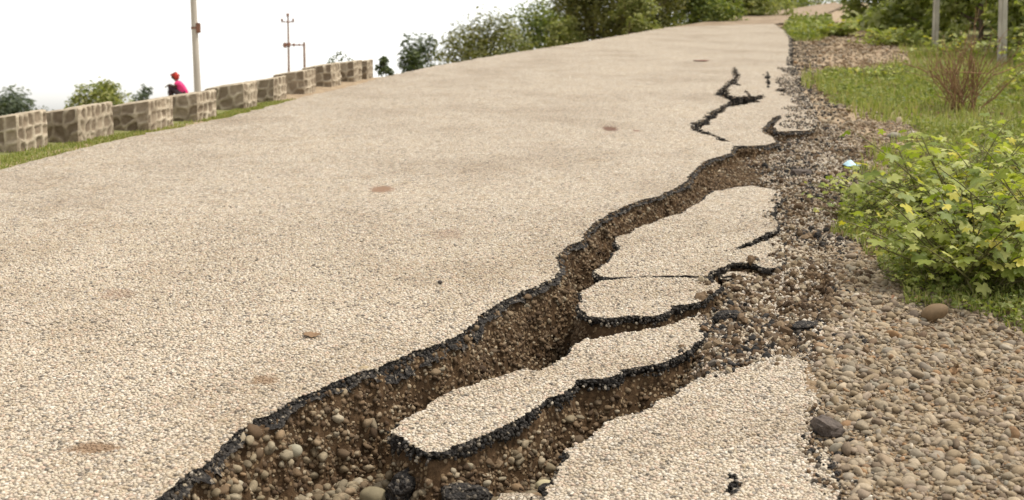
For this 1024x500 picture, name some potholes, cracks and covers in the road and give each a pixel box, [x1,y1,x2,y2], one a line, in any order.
crack [155,67,859,500]
